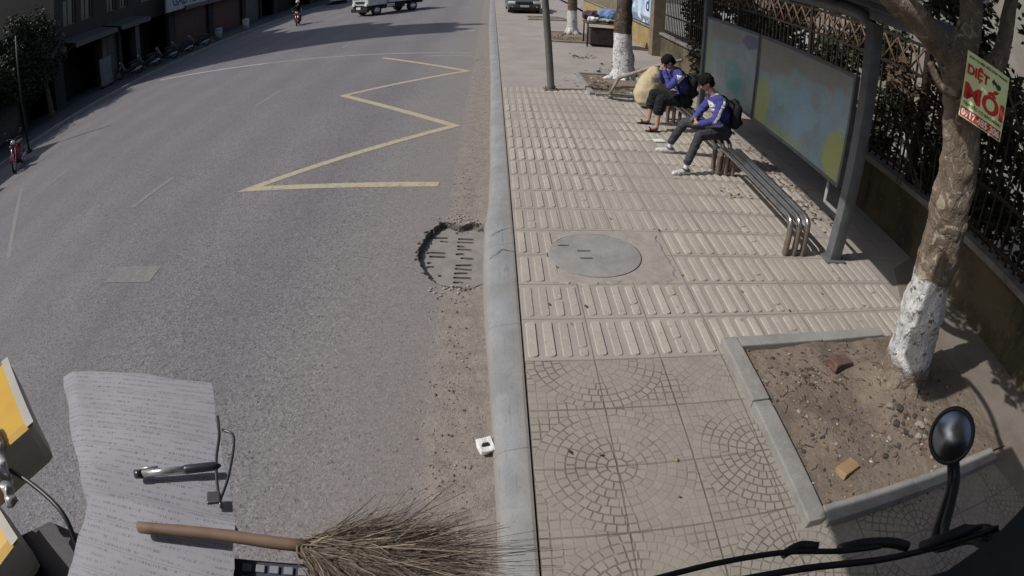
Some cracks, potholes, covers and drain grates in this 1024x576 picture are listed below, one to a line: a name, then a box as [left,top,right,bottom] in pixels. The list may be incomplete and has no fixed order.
manhole cover [547,231,678,287]
pothole [413,213,484,299]
